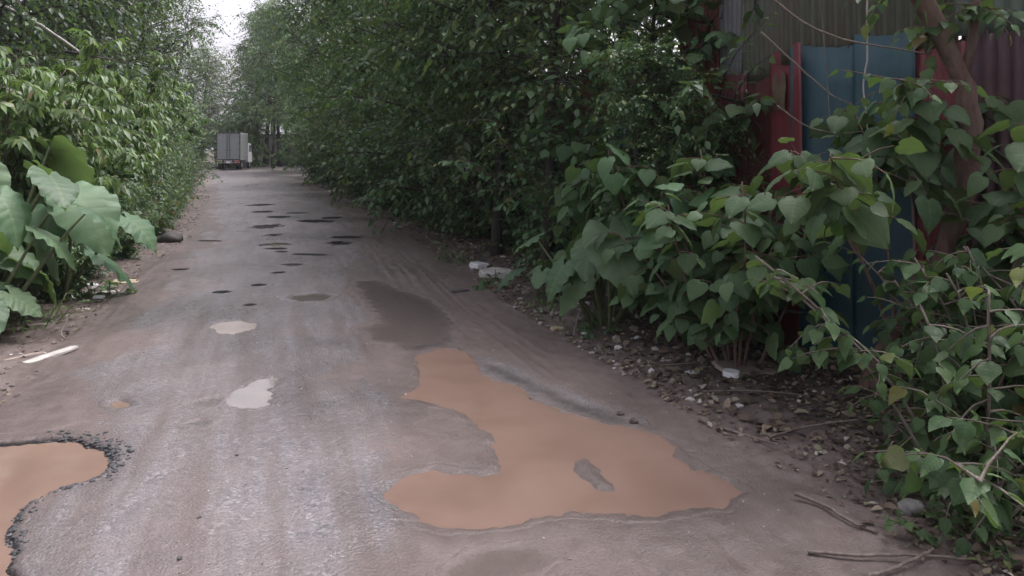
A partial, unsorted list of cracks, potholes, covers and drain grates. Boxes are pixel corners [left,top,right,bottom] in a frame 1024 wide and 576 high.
pothole [0,429,135,576]
pothole [98,395,143,412]
pothole [200,317,266,337]
pothole [281,290,343,303]
pothole [217,372,296,412]
pothole [371,348,755,536]
